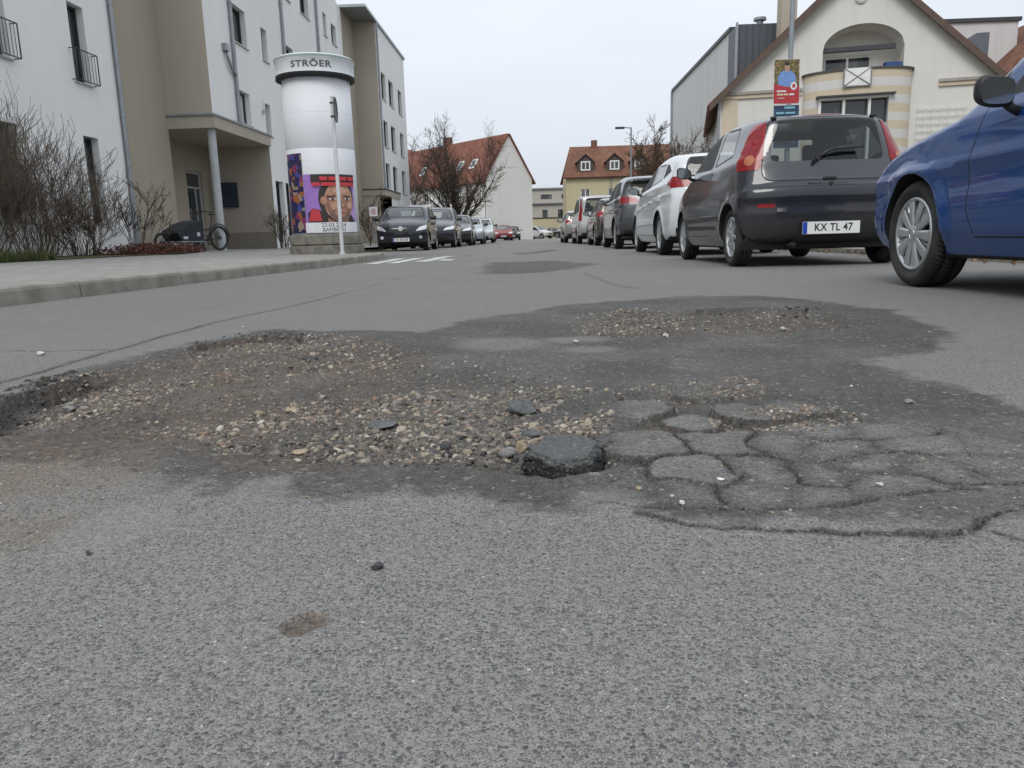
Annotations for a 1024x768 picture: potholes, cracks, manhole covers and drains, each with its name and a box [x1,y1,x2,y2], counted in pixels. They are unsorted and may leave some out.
crack [600,386,1024,541]
crack [589,274,642,289]
pothole [0,334,619,486]
